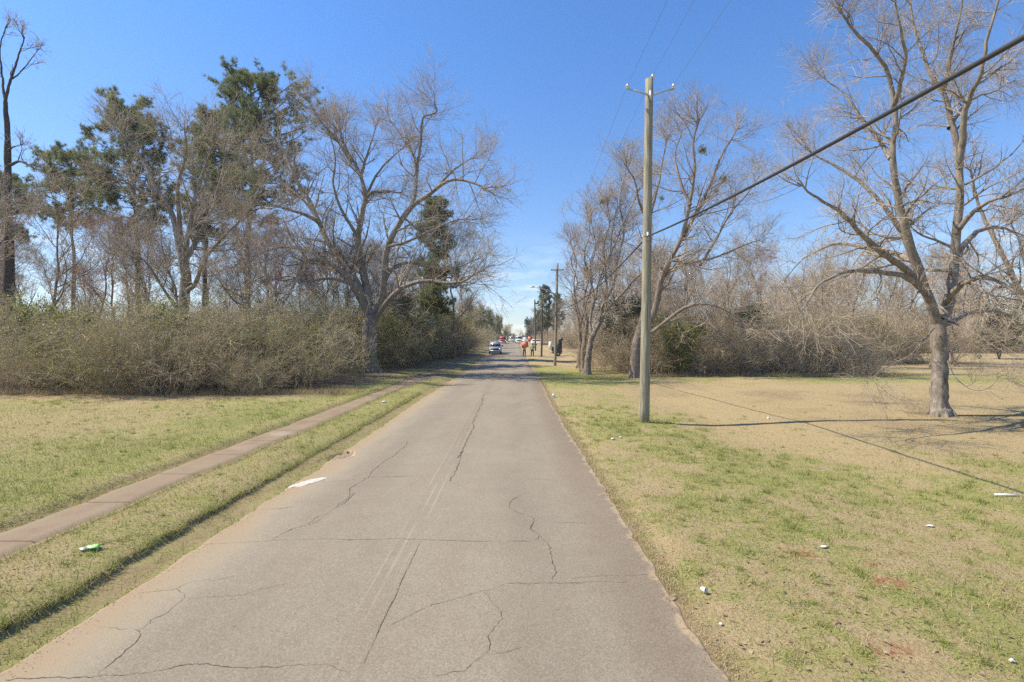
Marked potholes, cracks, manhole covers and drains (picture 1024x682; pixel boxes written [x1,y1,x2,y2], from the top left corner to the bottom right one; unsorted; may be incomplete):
crack [11,576,347,680]
crack [215,538,456,662]
crack [273,442,407,539]
crack [393,498,645,675]
pothole [332,450,358,461]
crack [450,398,483,481]
